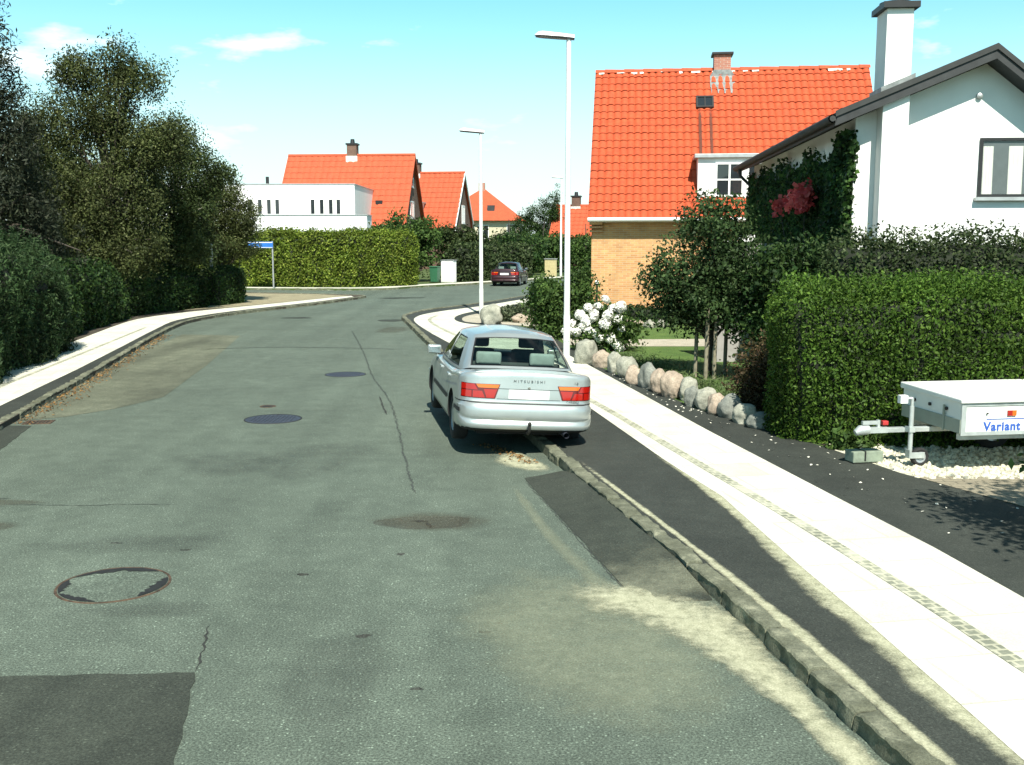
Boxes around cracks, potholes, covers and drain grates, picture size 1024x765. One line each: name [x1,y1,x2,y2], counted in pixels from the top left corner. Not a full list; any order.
crack [195,624,211,671]
manhole cover [54,567,172,604]
manhole cover [244,414,302,424]
